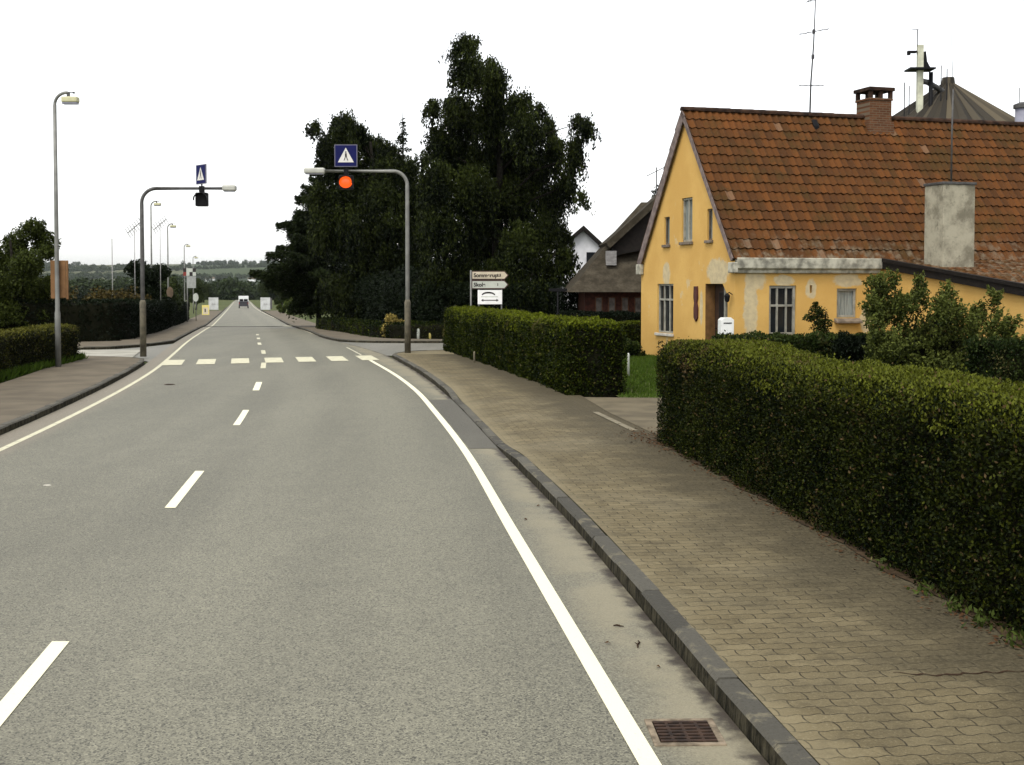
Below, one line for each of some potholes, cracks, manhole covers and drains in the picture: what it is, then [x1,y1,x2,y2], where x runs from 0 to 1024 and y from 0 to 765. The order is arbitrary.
drain grate [644,718,727,747]
